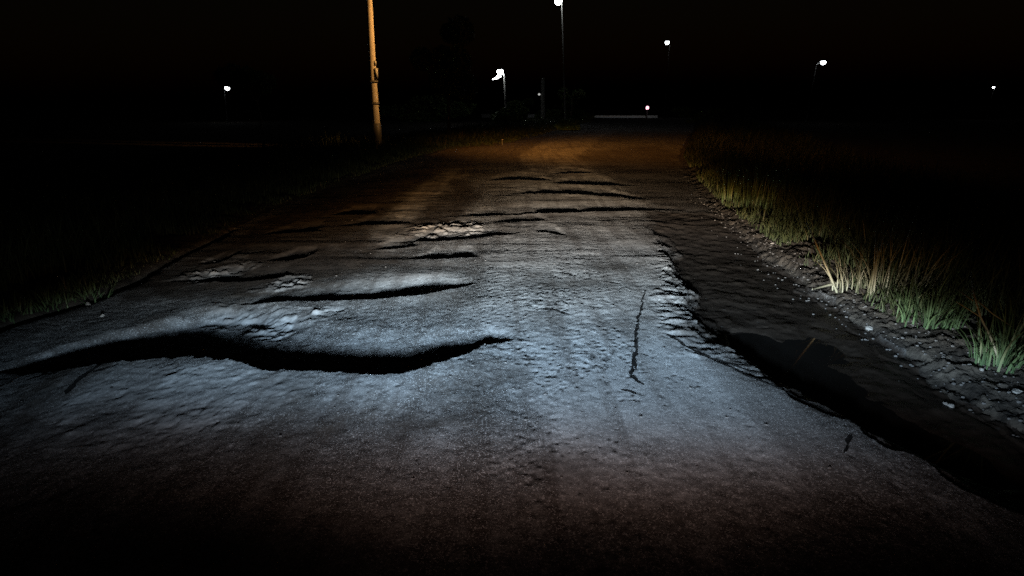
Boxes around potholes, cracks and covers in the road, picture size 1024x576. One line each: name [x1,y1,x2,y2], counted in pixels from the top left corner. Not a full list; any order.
crack [623,291,646,394]
pothole [1,300,512,375]
pothole [397,224,519,243]
pothole [725,324,1024,495]
pothole [180,262,297,282]
pothole [221,272,475,303]
